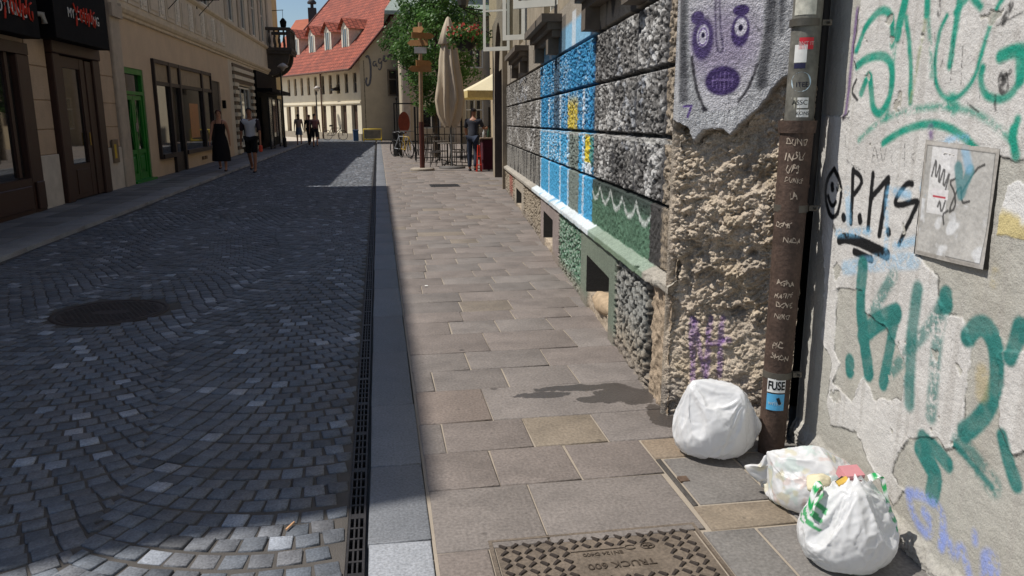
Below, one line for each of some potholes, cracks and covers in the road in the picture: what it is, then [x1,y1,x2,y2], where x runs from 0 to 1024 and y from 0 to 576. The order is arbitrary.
manhole cover [48,299,170,327]
utility cover [488,522,735,576]
